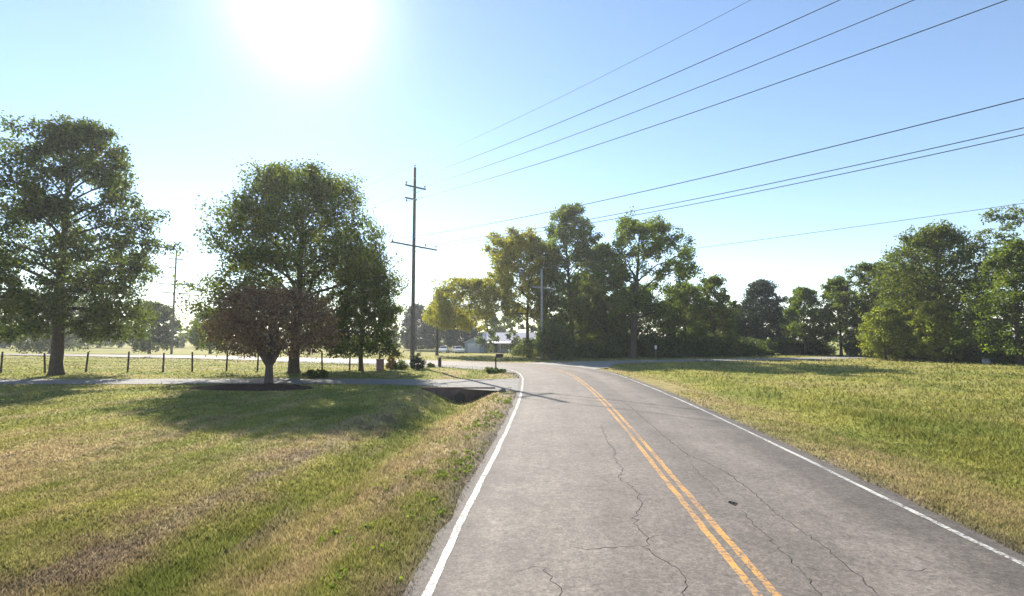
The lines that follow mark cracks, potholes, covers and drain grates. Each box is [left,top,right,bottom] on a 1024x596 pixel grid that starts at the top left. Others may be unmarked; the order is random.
crack [622,401,926,596]
crack [562,427,688,596]
